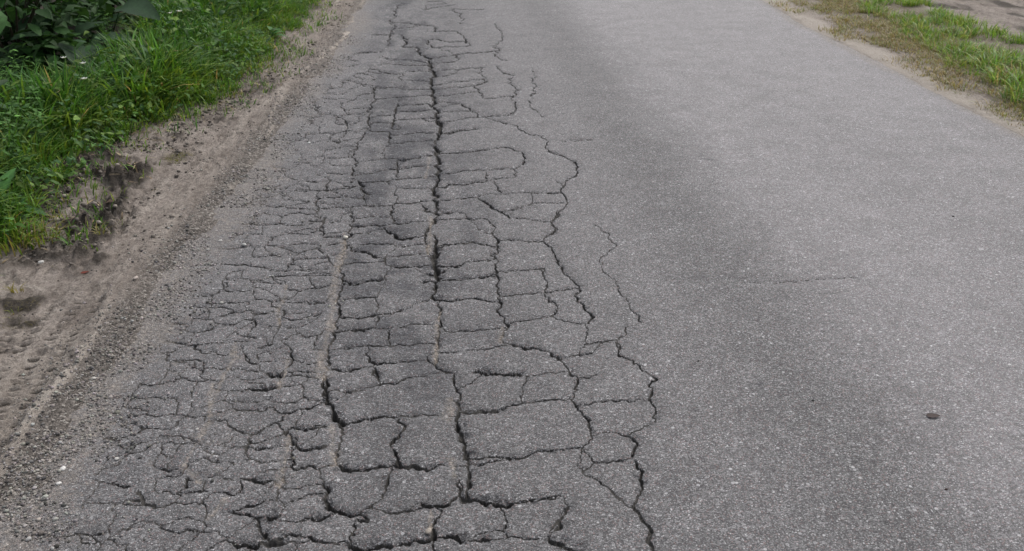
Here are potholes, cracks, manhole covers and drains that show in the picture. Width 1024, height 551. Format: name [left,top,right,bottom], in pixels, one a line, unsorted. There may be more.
crack [47,1,658,551]
